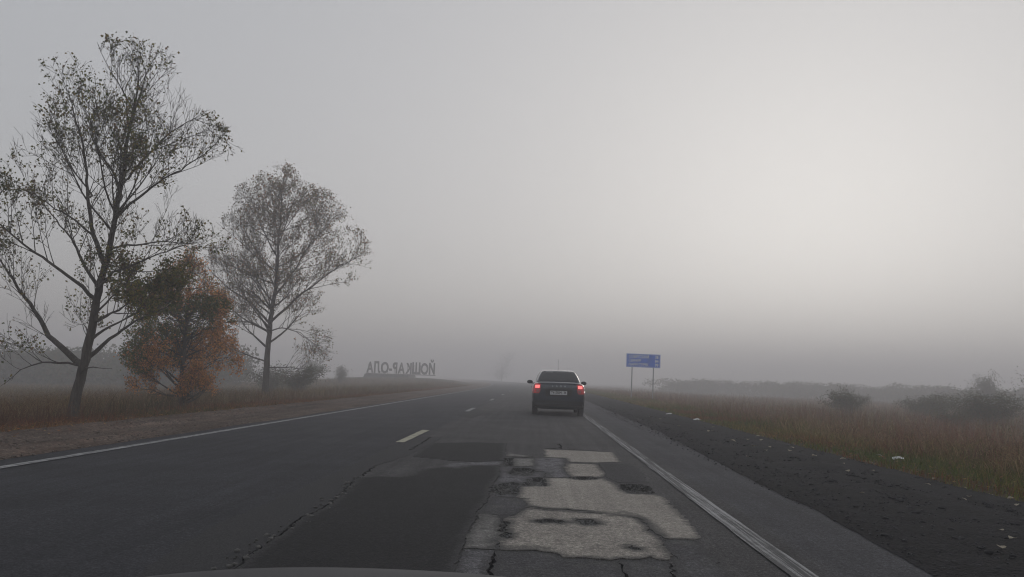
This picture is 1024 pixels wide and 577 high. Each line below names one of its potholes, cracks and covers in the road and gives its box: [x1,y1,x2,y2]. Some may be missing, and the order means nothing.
pothole [619,484,656,494]
pothole [489,482,520,495]
pothole [509,468,535,476]
pothole [522,478,547,486]
crack [211,467,375,570]
crack [486,552,496,576]
